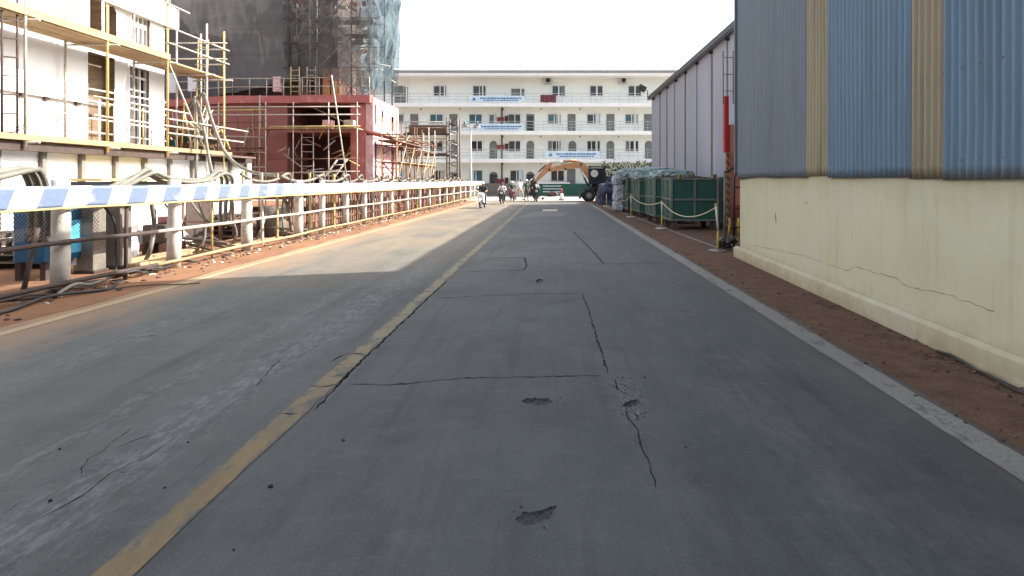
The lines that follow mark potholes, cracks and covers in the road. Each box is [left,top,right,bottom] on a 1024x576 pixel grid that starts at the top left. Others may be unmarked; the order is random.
crack [288,281,595,415]
pothole [516,505,557,525]
crack [2,427,173,519]
pothole [522,398,553,406]
